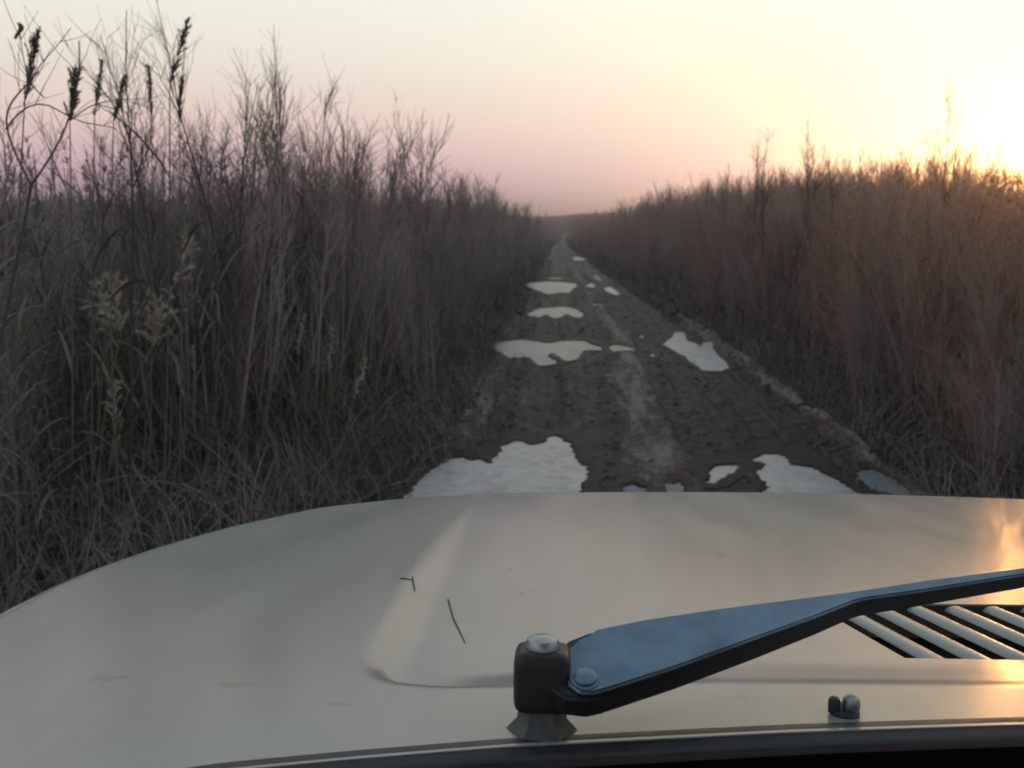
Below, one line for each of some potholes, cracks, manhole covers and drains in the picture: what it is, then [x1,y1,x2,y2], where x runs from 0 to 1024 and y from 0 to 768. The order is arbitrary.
pothole [525,281,581,295]
pothole [731,448,876,494]
pothole [524,306,589,319]
pothole [485,338,610,367]
pothole [690,458,766,489]
pothole [380,431,608,501]
pothole [840,461,932,496]
pothole [656,331,740,372]
